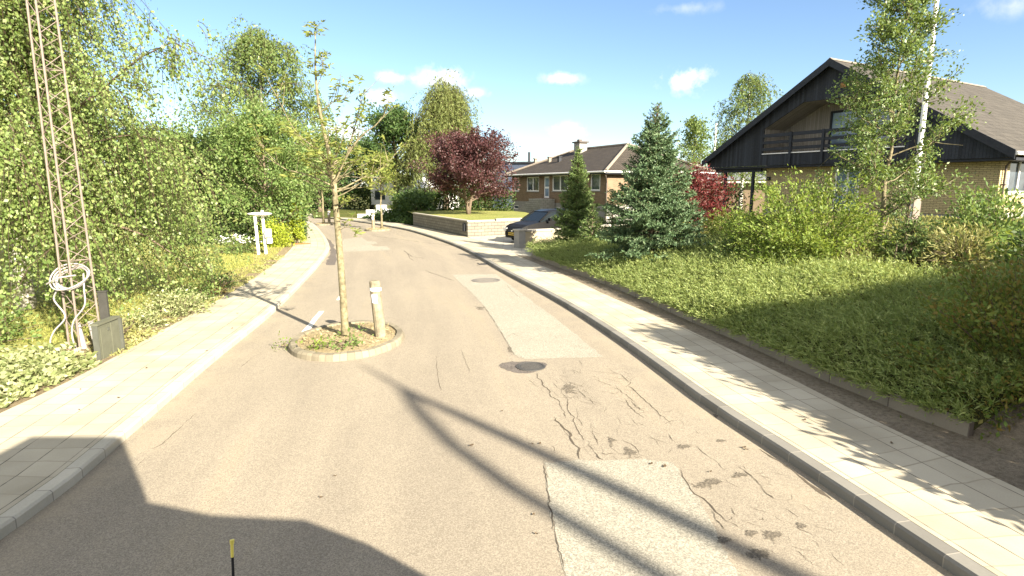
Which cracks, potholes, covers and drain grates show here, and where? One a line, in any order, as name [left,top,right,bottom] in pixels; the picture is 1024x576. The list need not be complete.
crack [527,362,846,567]
manhole cover [516,362,545,371]
